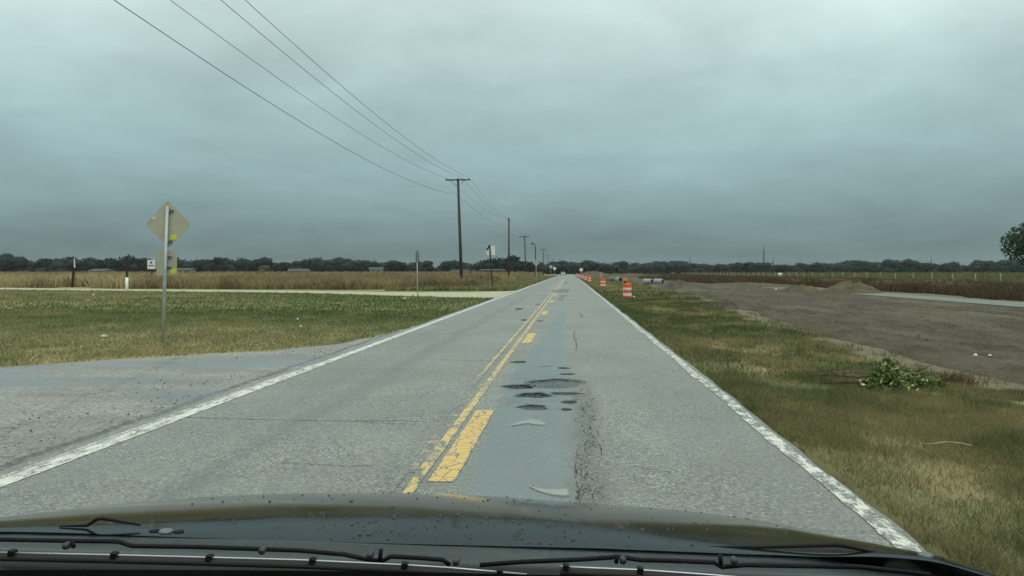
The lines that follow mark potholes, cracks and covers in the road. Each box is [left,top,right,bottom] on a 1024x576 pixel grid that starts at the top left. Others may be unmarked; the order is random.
crack [574,391,603,503]
pothole [525,378,586,388]
